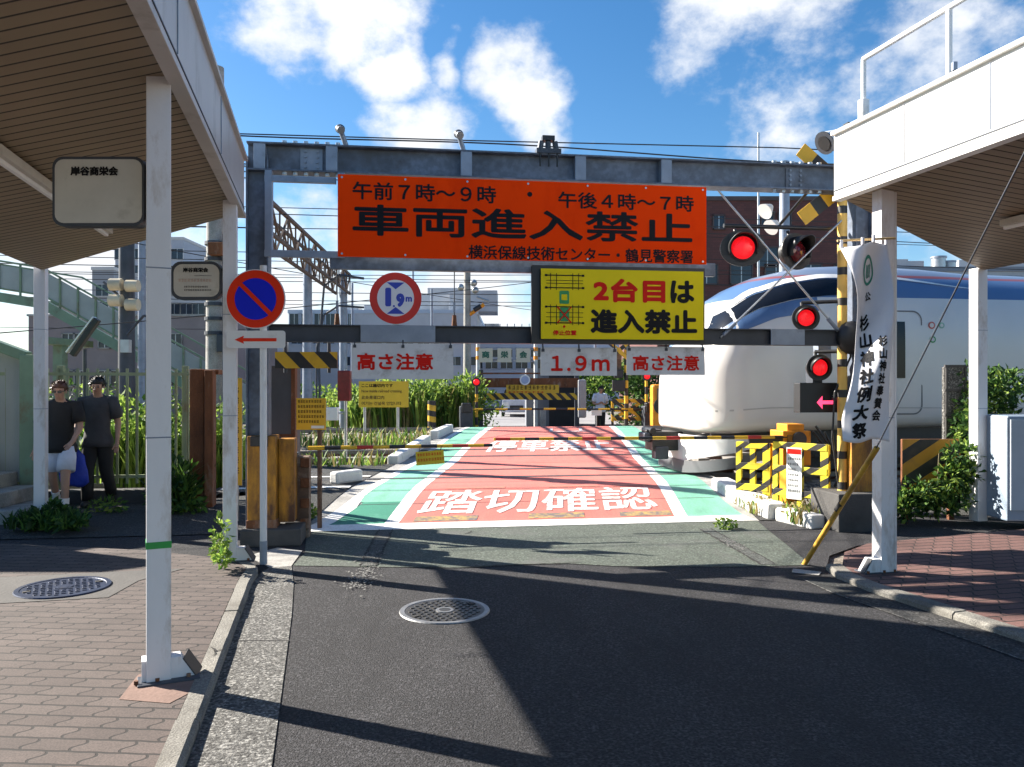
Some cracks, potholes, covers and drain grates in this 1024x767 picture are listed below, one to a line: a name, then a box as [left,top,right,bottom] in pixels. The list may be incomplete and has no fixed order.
manhole cover [12,576,112,599]
manhole cover [399,598,490,624]
